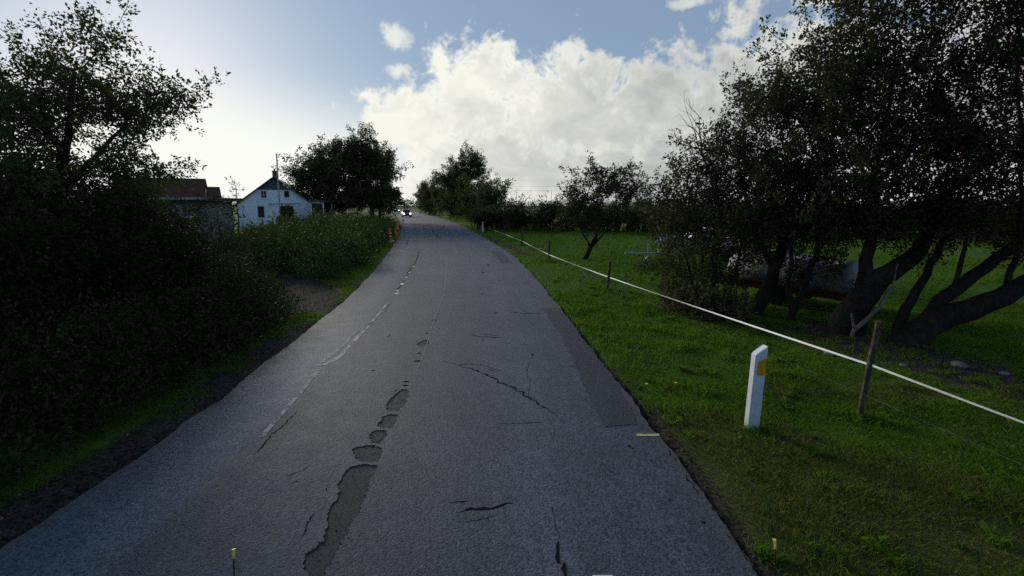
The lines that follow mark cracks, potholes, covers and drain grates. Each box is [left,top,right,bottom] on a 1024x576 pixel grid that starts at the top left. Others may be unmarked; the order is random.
crack [550,503,569,576]
pothole [303,464,378,576]
pothole [386,389,409,411]
pothole [369,430,387,444]
pothole [377,414,398,428]
crack [445,361,557,416]
pothole [352,445,383,462]
